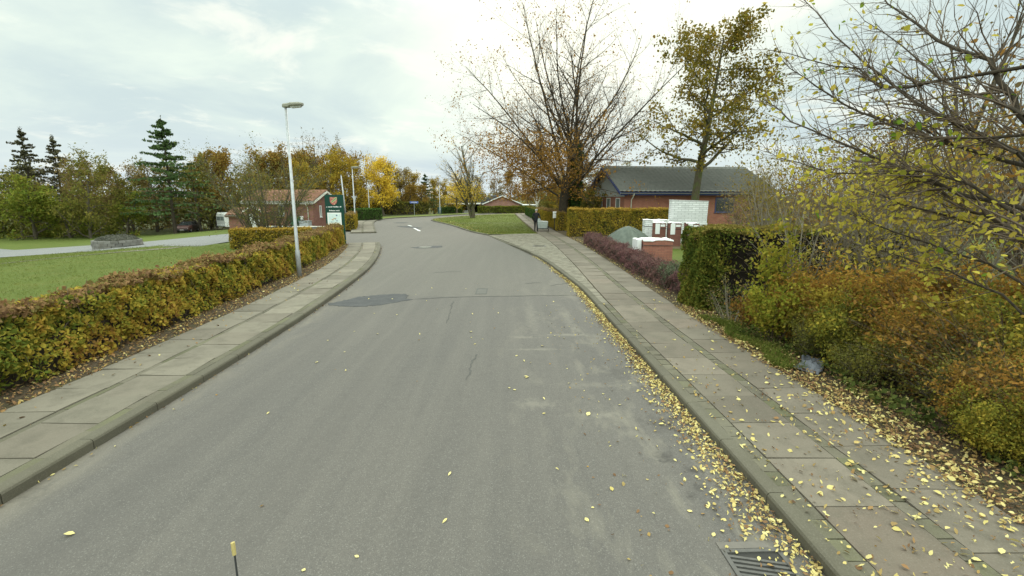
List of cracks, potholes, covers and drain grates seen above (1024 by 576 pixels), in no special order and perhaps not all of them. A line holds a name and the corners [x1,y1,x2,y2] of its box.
drain grate [716,541,801,576]
